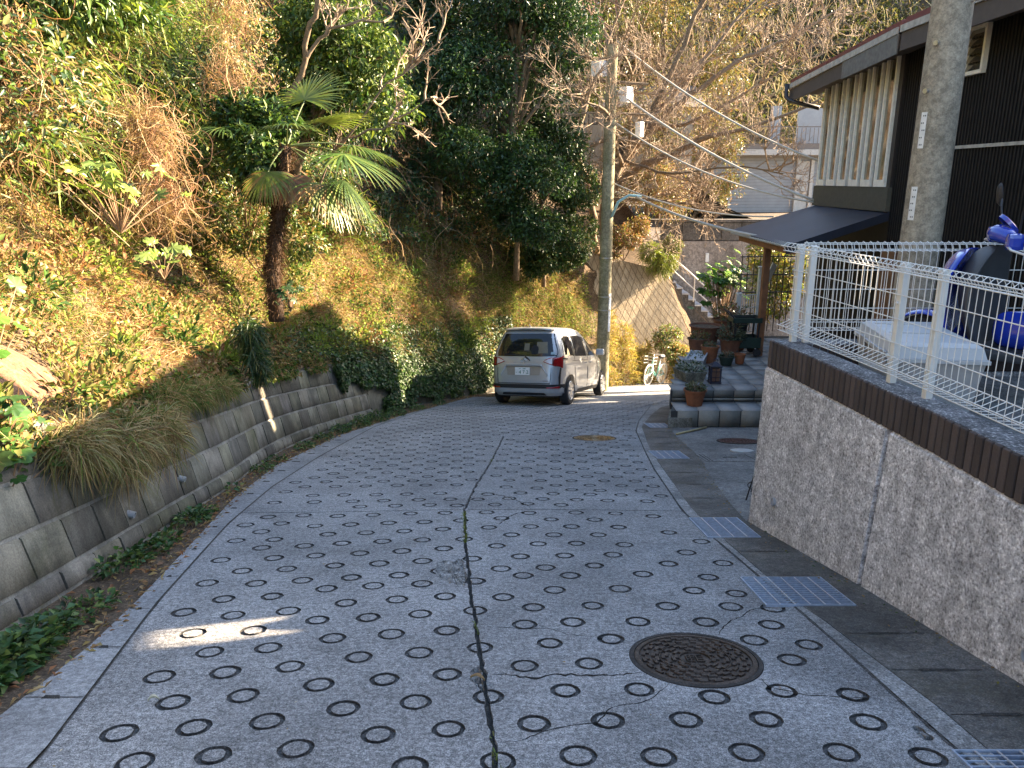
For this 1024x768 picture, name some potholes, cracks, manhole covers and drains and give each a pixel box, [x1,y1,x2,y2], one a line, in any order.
drain grate [951,749,1024,768]
crack [501,685,668,743]
pothole [435,559,467,587]
pothole [470,667,484,694]
manhole cover [629,633,763,689]
drain grate [643,423,668,432]
